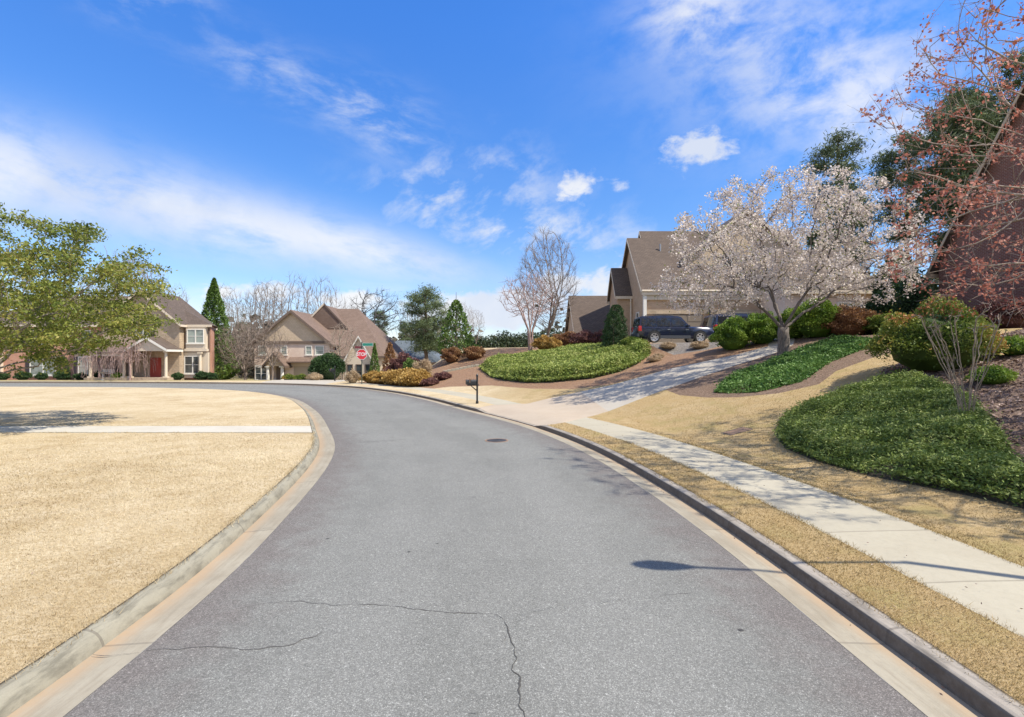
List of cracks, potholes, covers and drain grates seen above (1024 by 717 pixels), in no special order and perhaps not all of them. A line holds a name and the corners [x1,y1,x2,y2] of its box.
crack [93,633,320,656]
crack [246,601,565,717]
